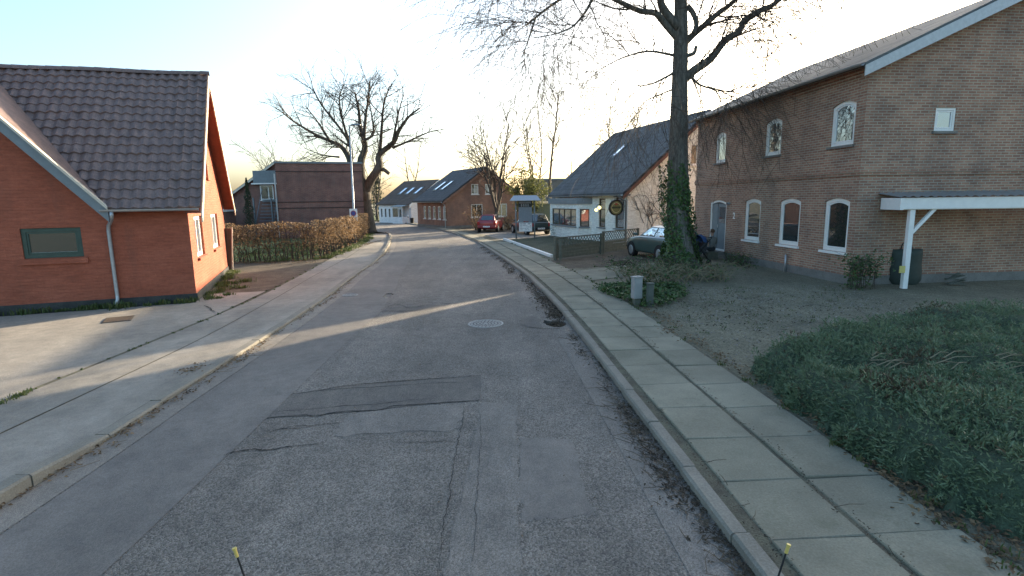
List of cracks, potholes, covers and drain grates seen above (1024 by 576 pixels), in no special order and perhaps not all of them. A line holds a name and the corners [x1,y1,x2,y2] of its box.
crack [406,404,465,566]
crack [226,375,478,455]
manhole cover [468,319,503,328]
